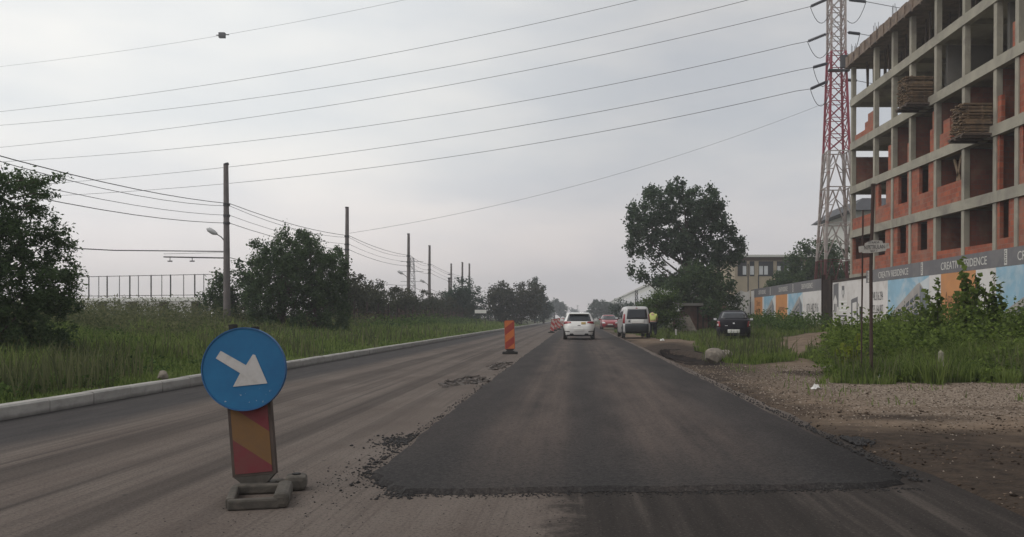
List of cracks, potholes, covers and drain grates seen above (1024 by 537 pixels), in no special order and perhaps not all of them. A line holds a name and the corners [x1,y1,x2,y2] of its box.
pothole [486,362,513,370]
pothole [438,375,490,387]
